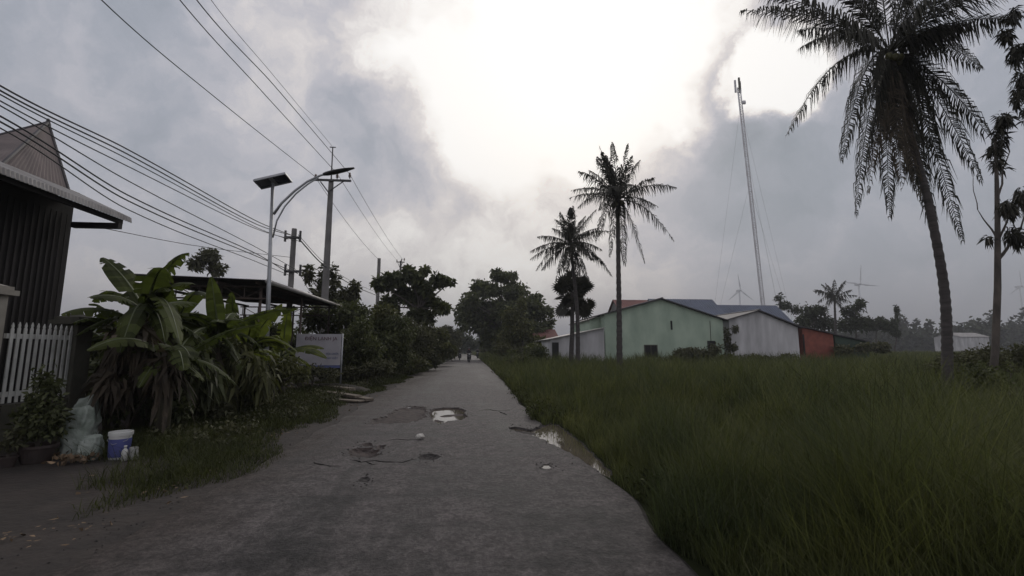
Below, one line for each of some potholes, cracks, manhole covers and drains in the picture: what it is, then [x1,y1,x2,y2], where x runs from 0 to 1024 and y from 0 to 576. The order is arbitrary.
pothole [348,443,386,458]
pothole [509,423,612,478]
pothole [368,406,428,424]
pothole [429,407,467,424]
